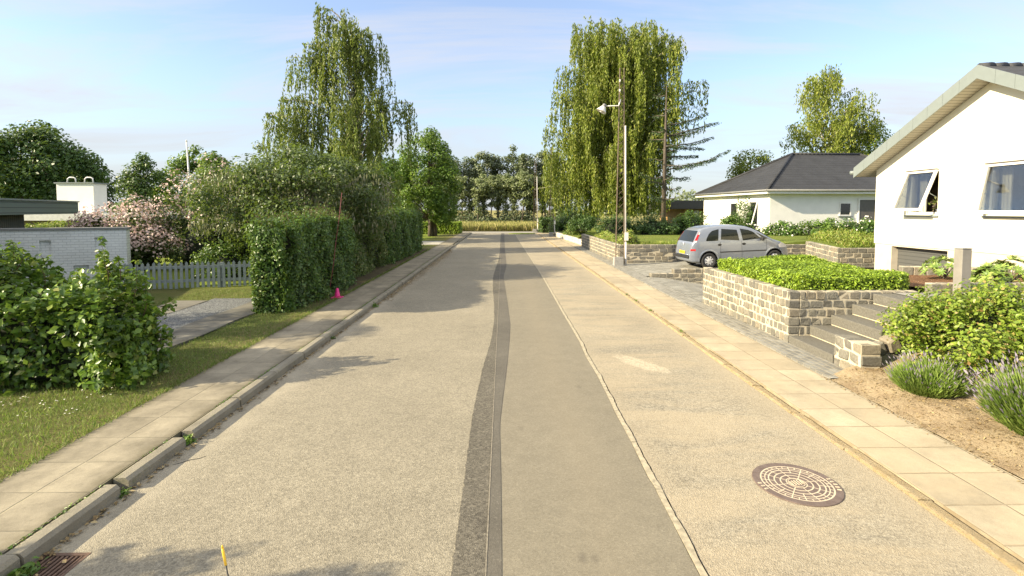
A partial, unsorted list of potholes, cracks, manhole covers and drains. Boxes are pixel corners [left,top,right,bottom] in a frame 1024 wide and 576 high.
manhole cover [752,463,845,507]
drain grate [29,552,92,576]
